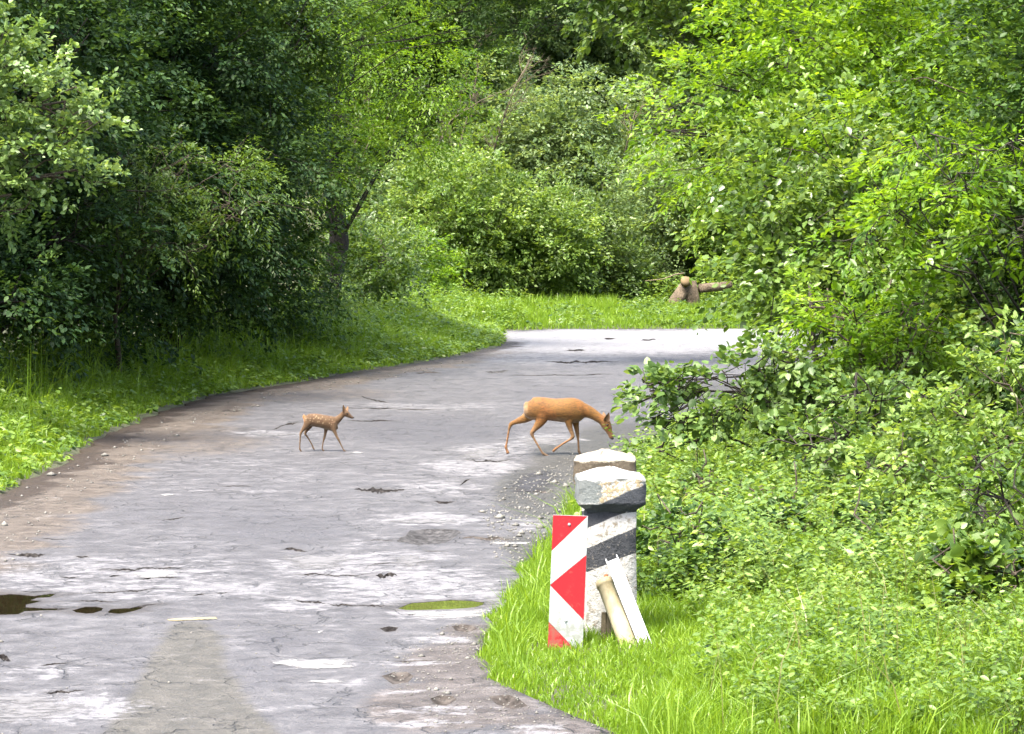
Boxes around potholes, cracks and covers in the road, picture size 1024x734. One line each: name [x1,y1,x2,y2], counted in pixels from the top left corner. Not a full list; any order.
crack [63,567,179,602]
crack [295,563,387,577]
pothole [397,529,460,545]
crack [294,599,384,607]
pothole [382,672,413,684]
pothole [489,694,527,709]
pothole [430,695,457,705]
